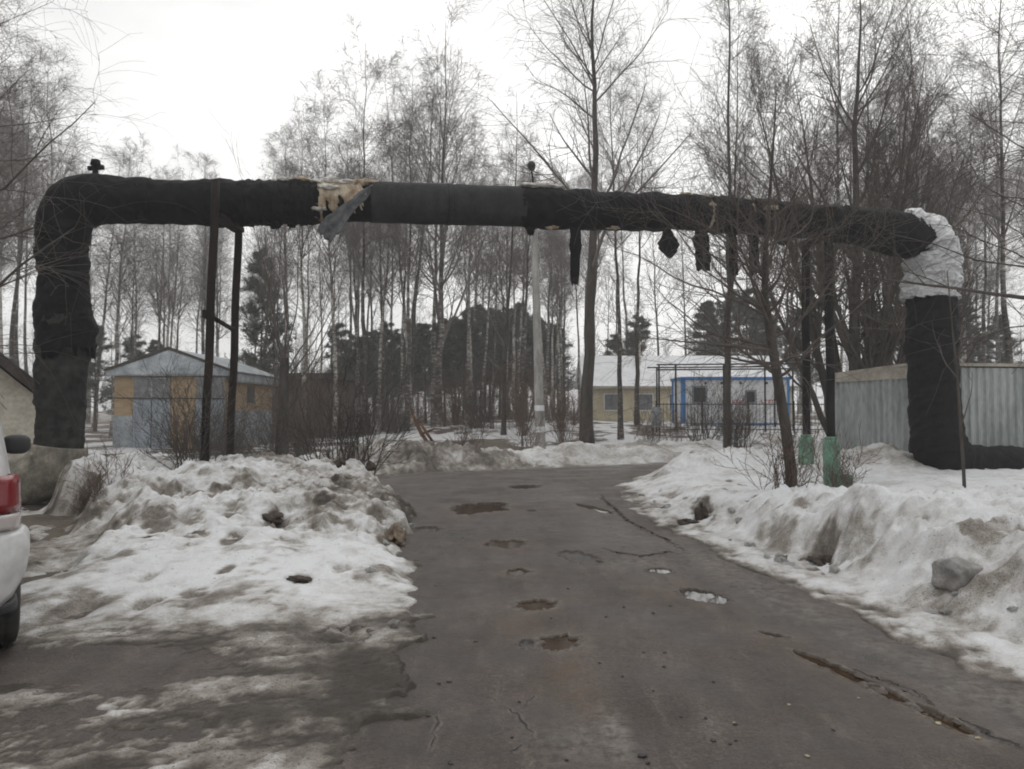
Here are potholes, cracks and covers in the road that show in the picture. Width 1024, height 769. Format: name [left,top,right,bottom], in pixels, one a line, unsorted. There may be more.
pothole [513,638,543,650]
crack [427,709,443,757]
pothole [510,598,563,612]
pothole [529,632,585,653]
crack [480,674,538,754]
pothole [448,502,511,516]
crack [952,717,1024,754]
pothole [643,567,676,575]
pothole [477,539,530,549]
pothole [675,587,736,605]
crack [598,495,684,557]
crack [852,669,935,706]
